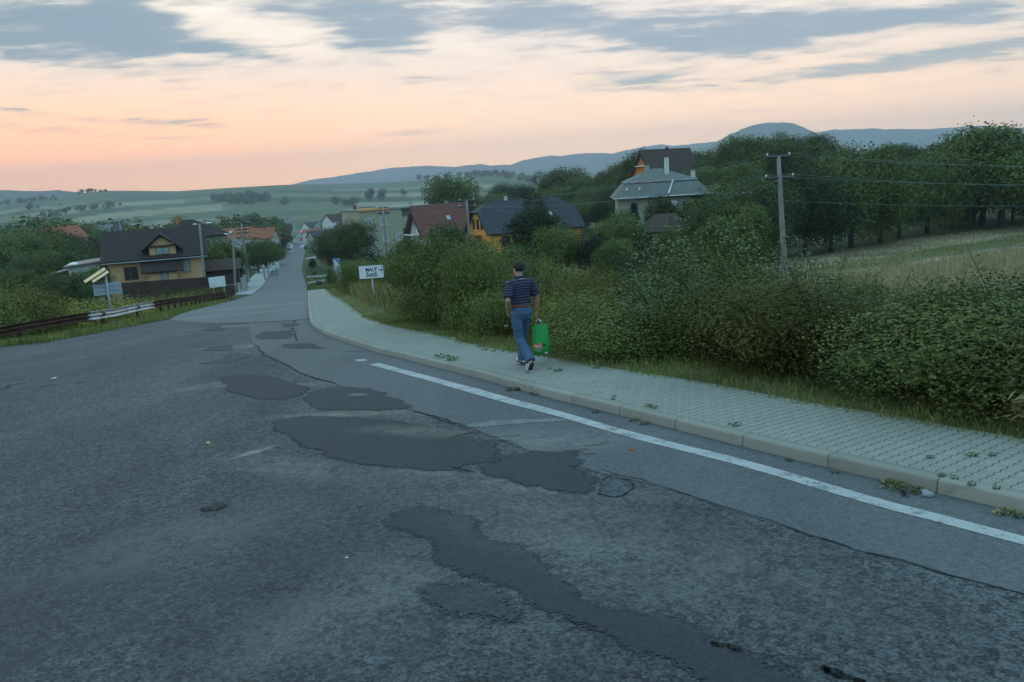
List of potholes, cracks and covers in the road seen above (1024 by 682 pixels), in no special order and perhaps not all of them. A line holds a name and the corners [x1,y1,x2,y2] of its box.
pothole [710,641,742,652]
pothole [819,664,867,682]
